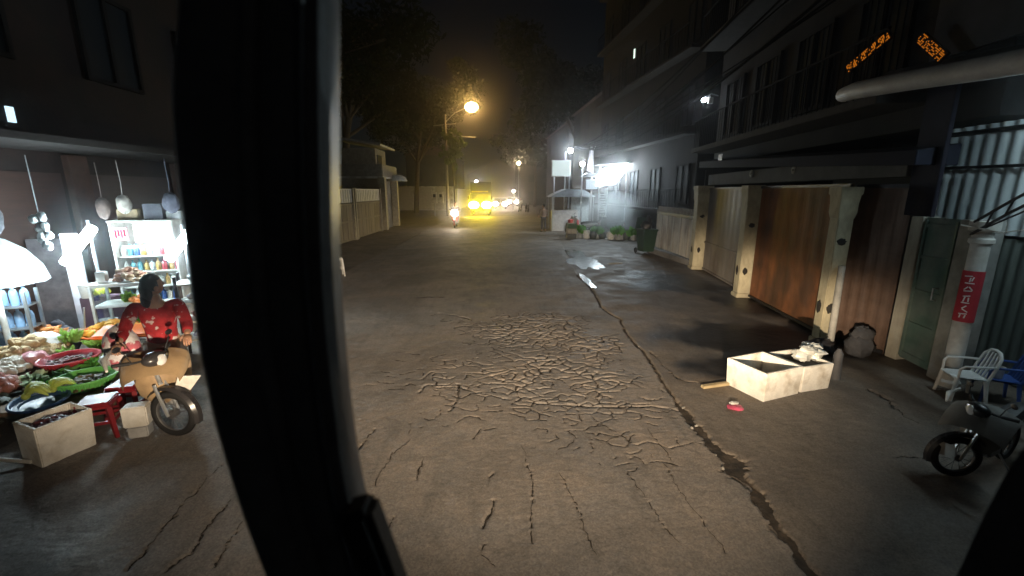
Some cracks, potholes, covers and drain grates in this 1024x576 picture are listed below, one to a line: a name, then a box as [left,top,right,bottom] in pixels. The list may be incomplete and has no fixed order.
crack [164,505,243,573]
crack [867,388,918,423]
crack [128,465,222,571]
crack [366,275,818,576]
